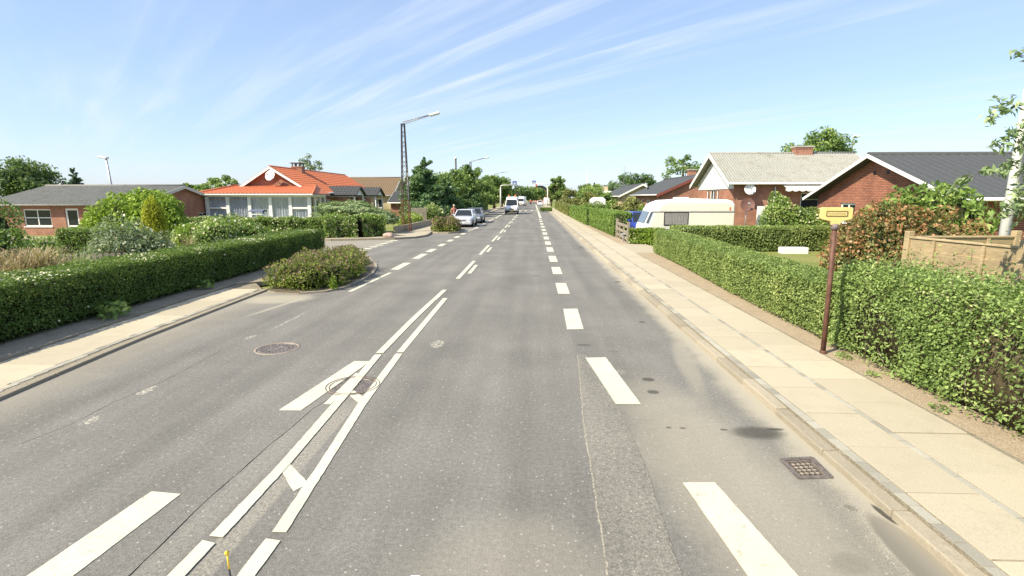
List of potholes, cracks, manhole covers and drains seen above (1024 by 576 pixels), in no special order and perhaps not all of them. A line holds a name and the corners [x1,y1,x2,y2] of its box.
manhole cover [254,342,300,355]
drain grate [779,456,834,479]
manhole cover [325,376,380,395]
crack [15,351,220,446]
